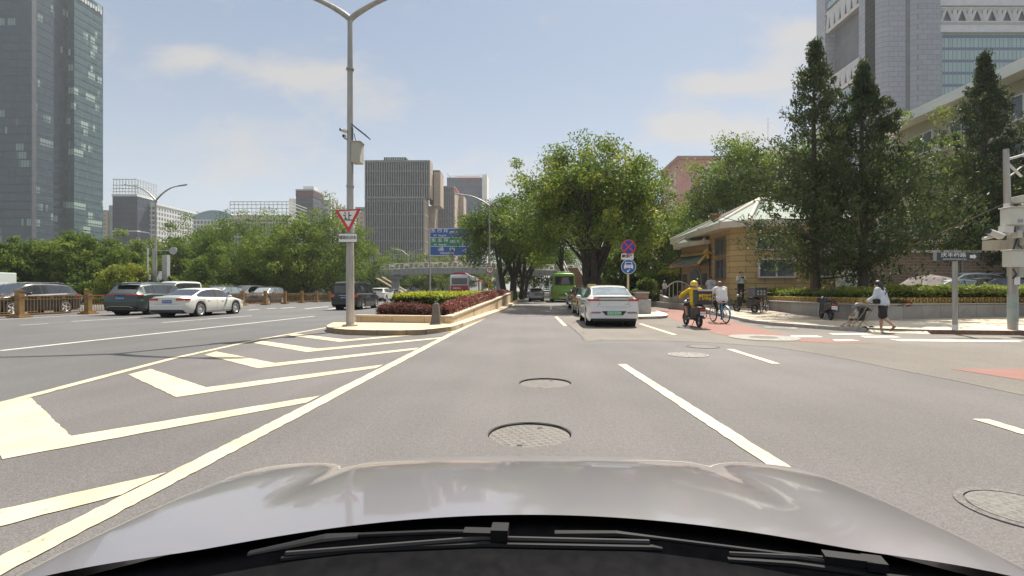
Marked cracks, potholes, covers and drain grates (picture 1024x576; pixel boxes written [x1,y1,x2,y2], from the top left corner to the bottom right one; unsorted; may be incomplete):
manhole cover [487,422,572,447]
manhole cover [952,487,1024,528]
manhole cover [519,378,571,388]
